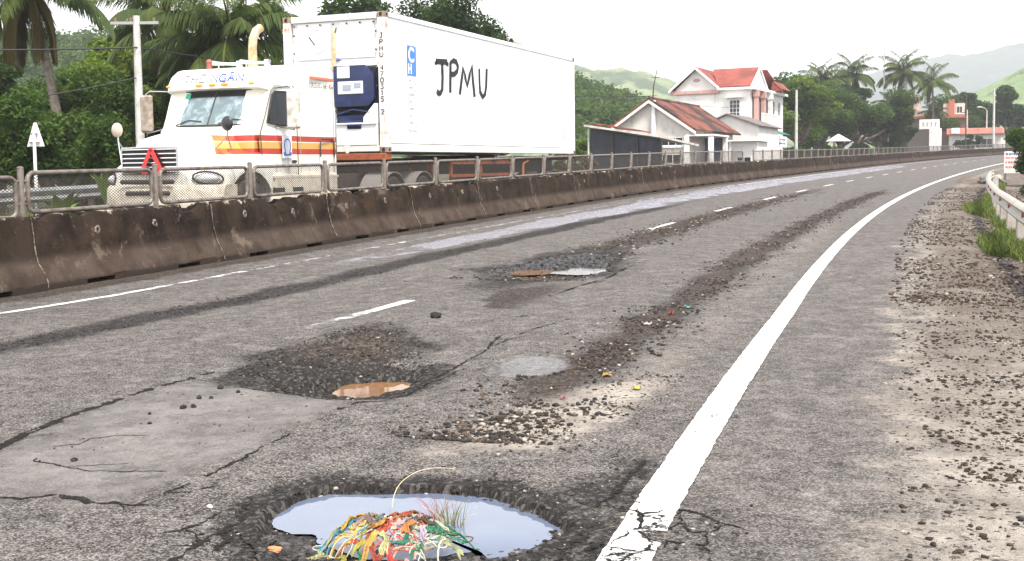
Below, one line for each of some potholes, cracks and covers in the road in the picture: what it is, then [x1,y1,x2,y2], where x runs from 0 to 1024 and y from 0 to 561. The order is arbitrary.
crack [163,492,301,561]
crack [0,371,290,512]
pothole [481,252,619,279]
pothole [229,322,437,401]
crack [338,315,567,409]
pothole [235,478,592,561]
